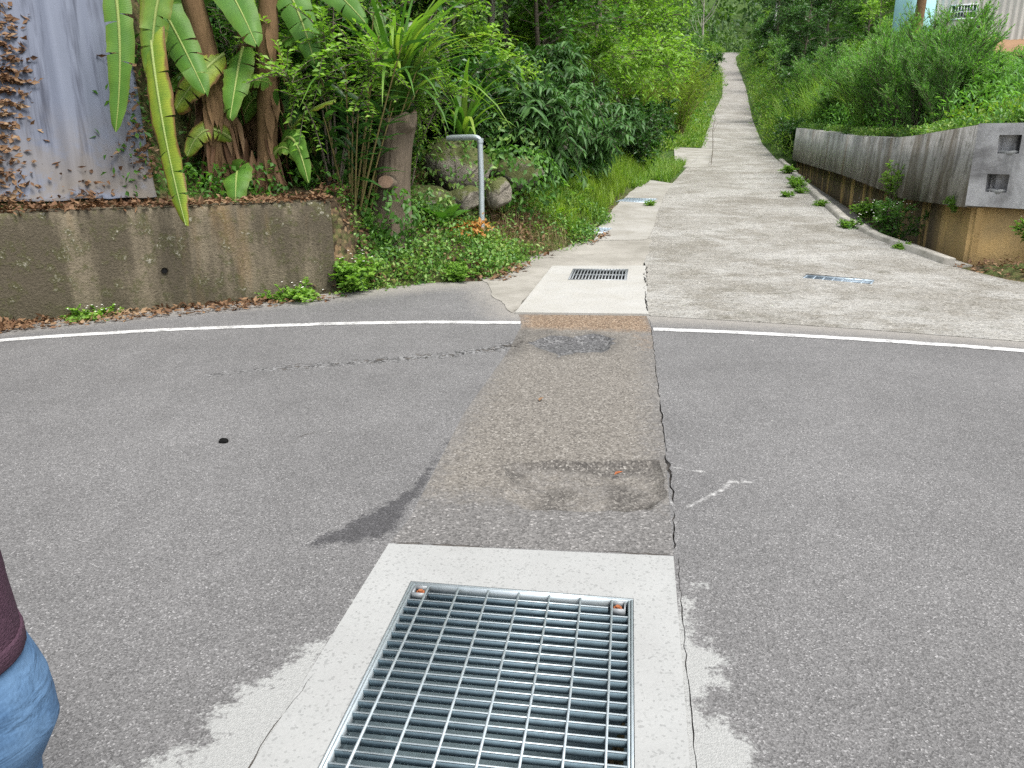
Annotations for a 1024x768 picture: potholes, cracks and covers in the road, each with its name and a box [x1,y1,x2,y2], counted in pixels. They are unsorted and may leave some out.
drain grate [803,275,874,284]
drain grate [318,581,634,768]
drain grate [568,269,628,280]
crack [397,267,697,768]
